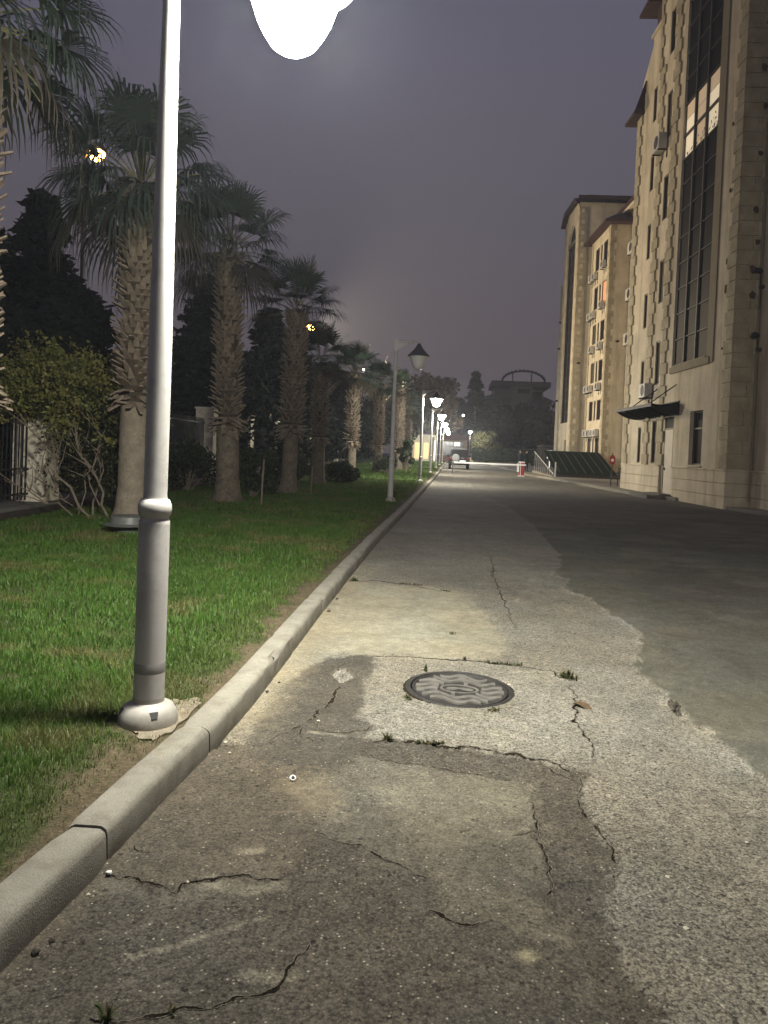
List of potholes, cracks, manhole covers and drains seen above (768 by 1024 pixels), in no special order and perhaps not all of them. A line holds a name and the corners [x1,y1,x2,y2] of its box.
crack [422,909,488,927]
crack [267,656,622,902]
crack [121,920,328,1022]
crack [103,870,295,894]
manhole cover [403,671,515,708]
crack [490,557,519,629]
